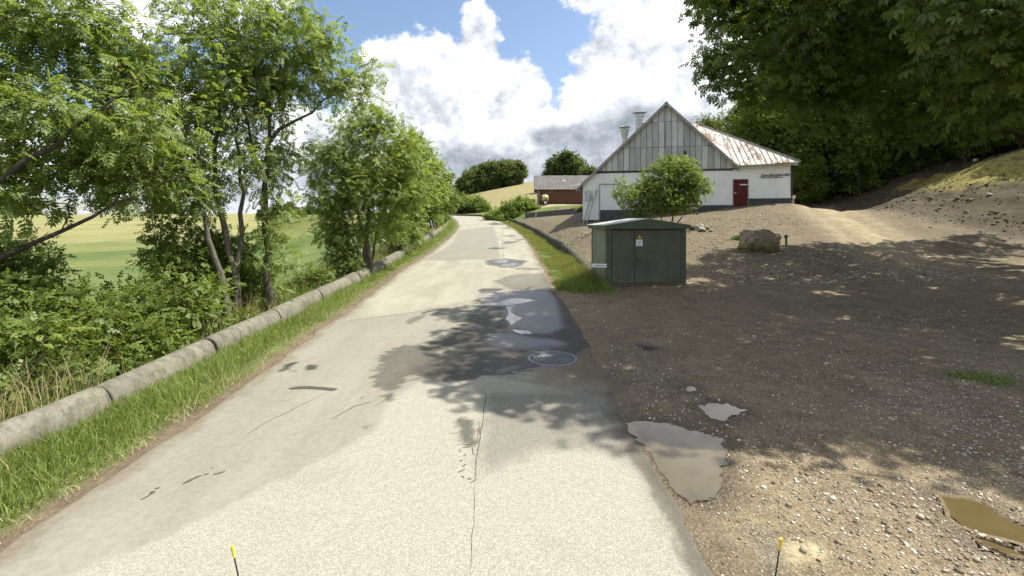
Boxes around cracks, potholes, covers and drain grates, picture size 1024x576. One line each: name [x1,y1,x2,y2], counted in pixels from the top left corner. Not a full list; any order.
manhole cover [527,351,579,367]
pothole [970,534,1024,560]
pothole [931,492,1024,547]
